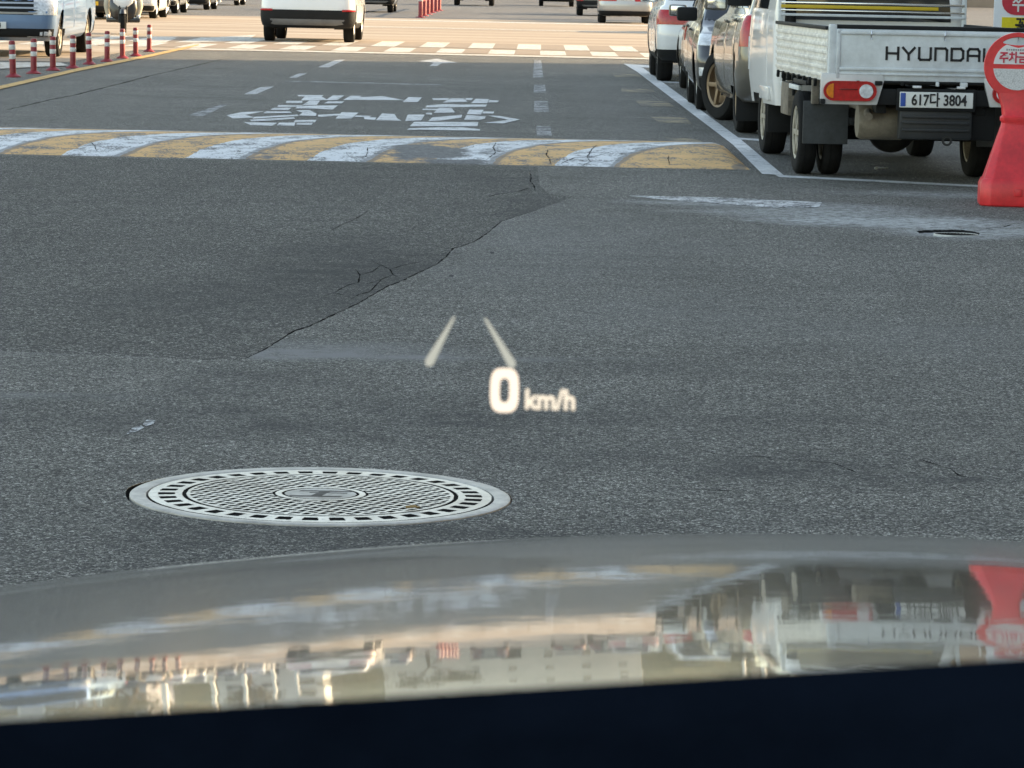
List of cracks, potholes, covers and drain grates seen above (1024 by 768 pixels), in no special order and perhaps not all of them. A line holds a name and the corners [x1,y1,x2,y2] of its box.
crack [173,212,530,360]
crack [920,459,1018,478]
crack [702,450,874,473]
manhole cover [126,467,512,527]
